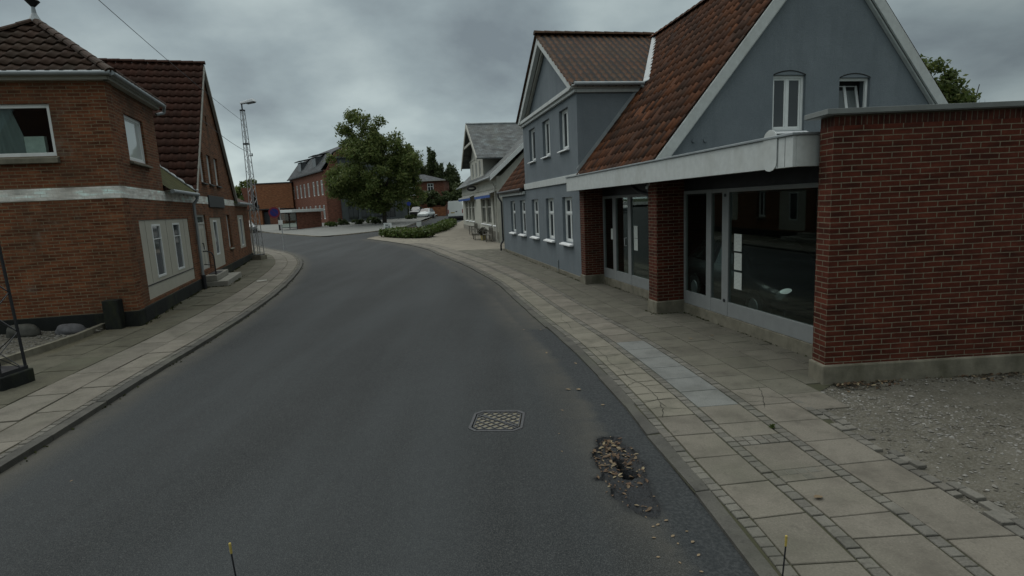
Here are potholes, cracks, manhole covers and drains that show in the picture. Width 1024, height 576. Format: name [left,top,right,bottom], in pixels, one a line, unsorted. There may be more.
pothole [592,437,661,517]
manhole cover [468,410,525,432]
